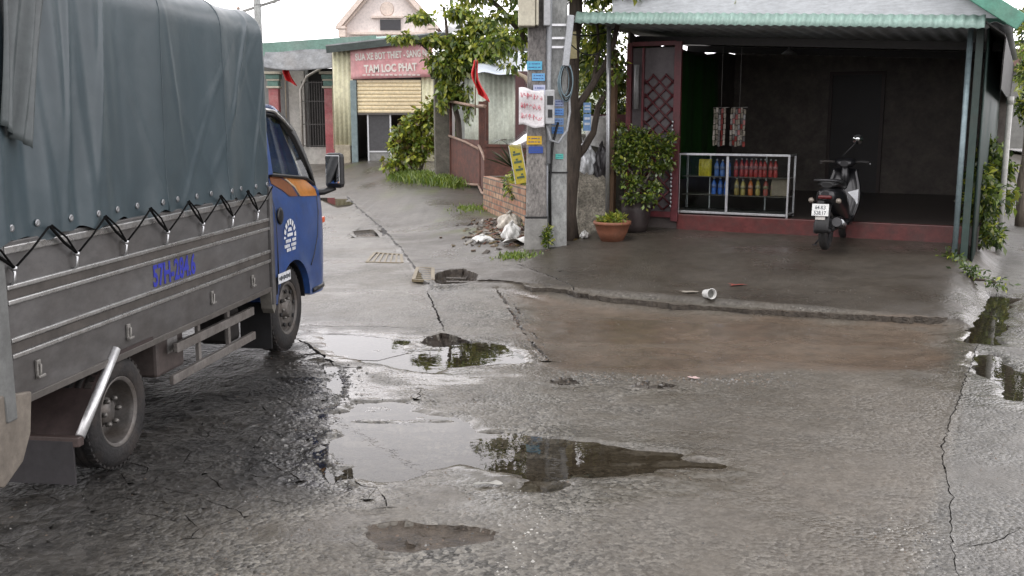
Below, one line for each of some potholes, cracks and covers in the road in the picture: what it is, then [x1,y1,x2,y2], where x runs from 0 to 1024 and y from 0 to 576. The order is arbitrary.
pothole [344,515,516,562]
crack [0,196,450,547]
pothole [411,330,481,356]
drain grate [365,252,404,263]
crack [476,264,1024,576]
